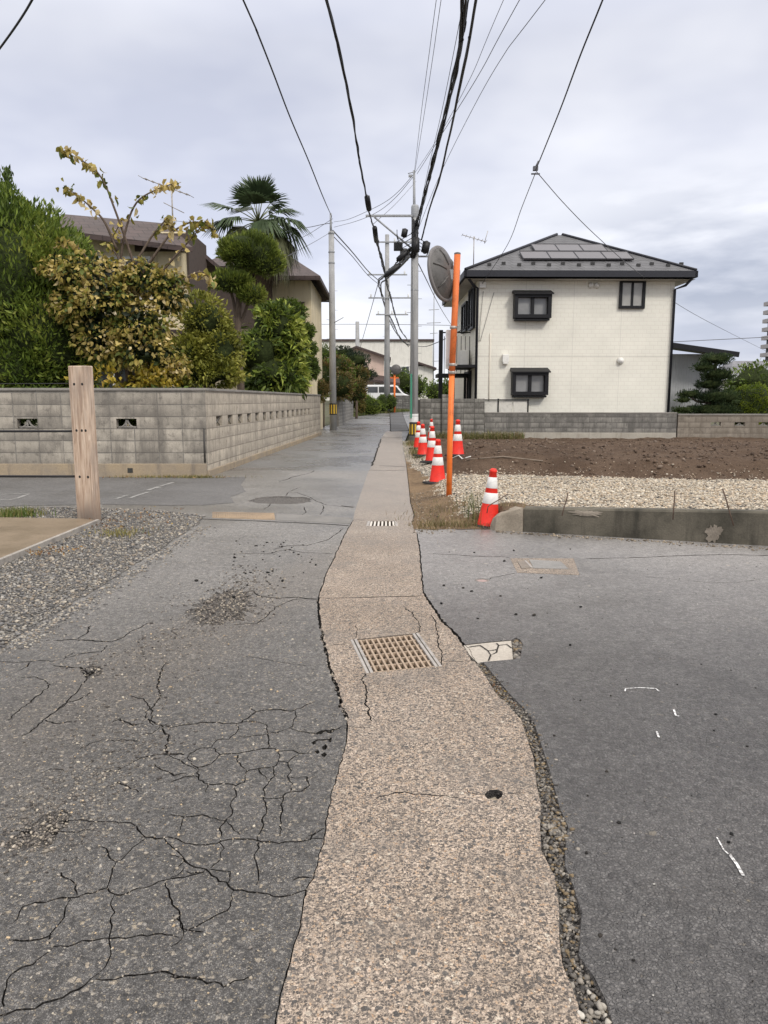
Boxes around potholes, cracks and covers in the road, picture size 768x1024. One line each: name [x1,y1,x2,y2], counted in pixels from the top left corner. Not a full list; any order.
manhole cover [510,558,580,575]
crack [376,789,522,799]
crack [0,623,148,736]
crack [361,674,372,721]
crack [236,590,318,625]
pothole [484,790,503,799]
drain grate [351,633,442,673]
crack [0,664,347,1016]
pothole [184,587,253,627]
